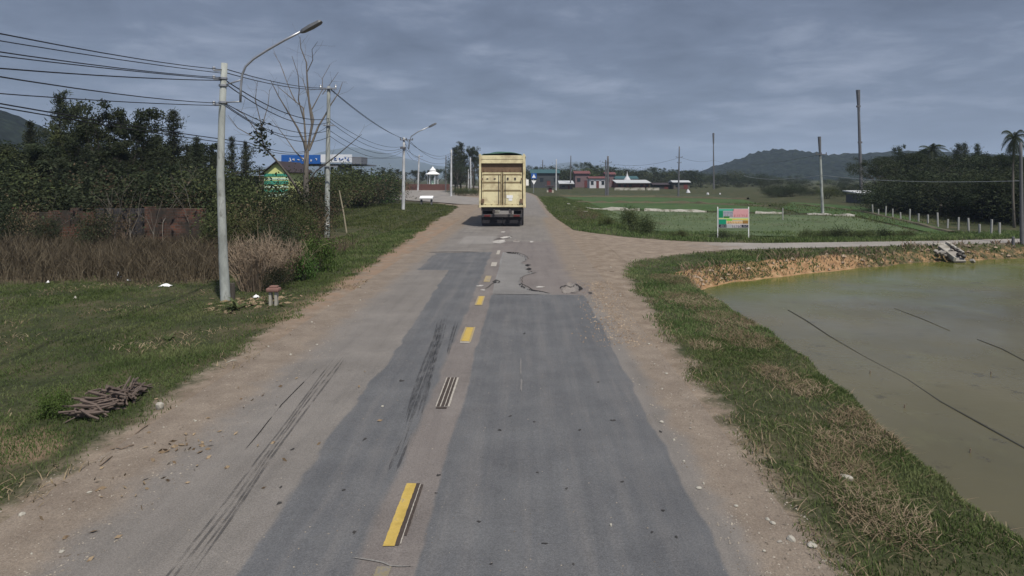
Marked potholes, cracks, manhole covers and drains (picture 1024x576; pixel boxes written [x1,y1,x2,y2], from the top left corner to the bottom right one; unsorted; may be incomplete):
pothole [561,282,579,294]
